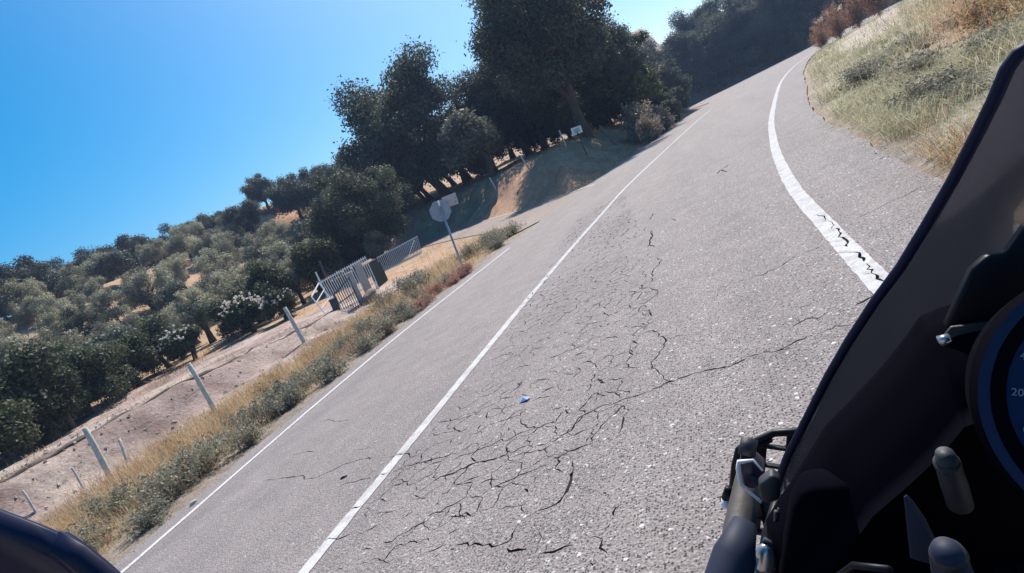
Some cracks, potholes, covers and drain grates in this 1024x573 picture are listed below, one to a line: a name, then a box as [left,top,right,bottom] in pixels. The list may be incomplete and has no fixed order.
crack [262,195,883,569]
